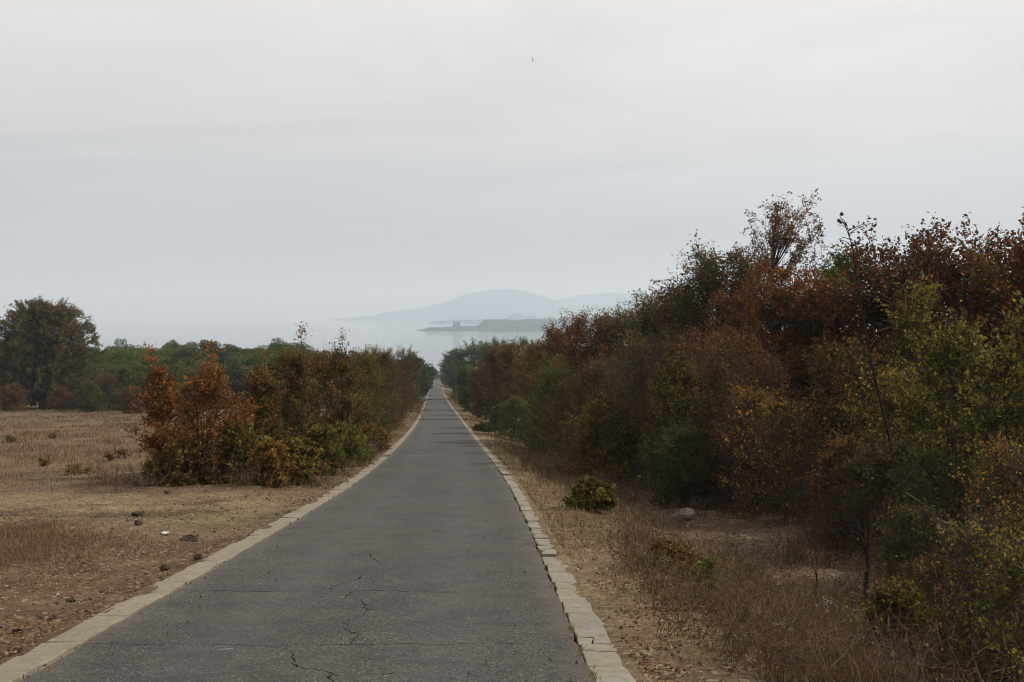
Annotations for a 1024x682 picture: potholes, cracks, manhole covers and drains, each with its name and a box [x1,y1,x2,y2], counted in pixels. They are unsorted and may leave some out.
crack [84,551,471,682]
